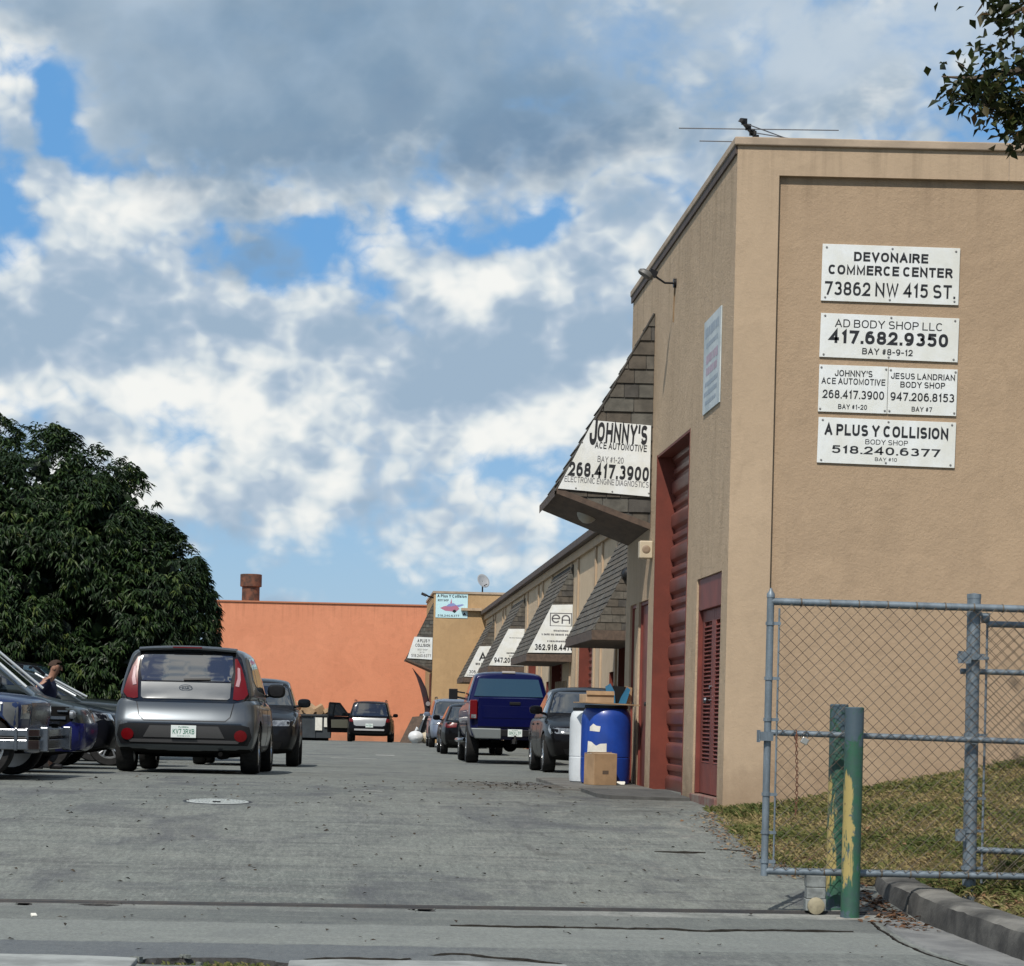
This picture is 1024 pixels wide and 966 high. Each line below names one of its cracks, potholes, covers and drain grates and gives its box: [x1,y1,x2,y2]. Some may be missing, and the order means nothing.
crack [451,924,853,932]
crack [429,953,562,964]
